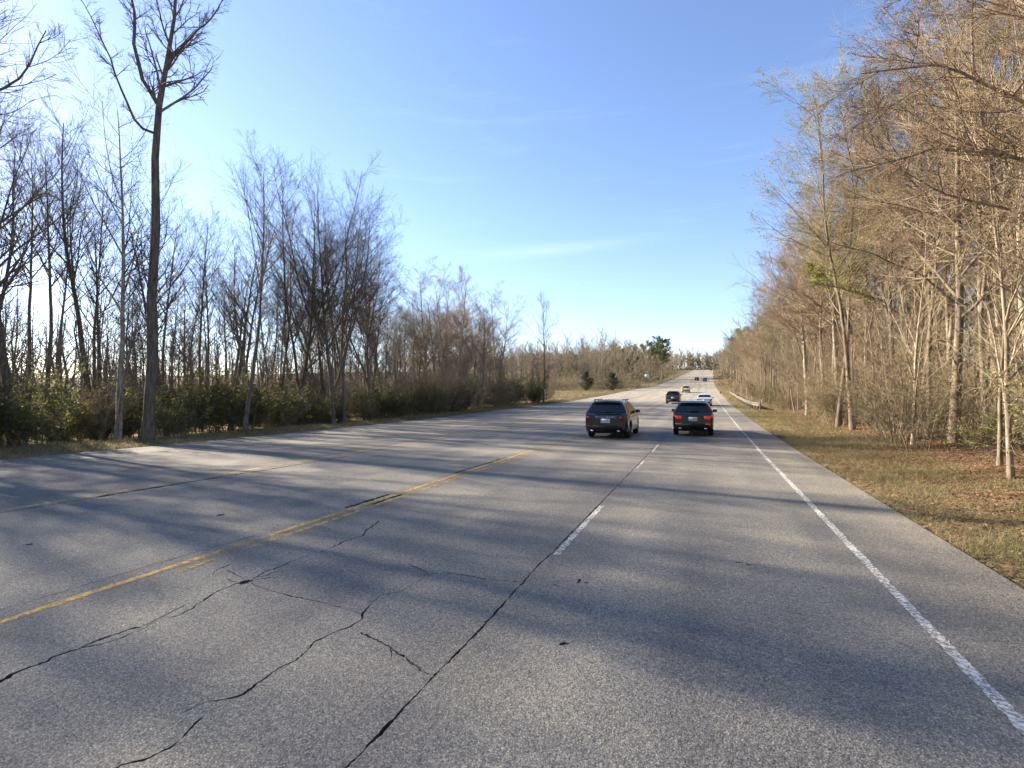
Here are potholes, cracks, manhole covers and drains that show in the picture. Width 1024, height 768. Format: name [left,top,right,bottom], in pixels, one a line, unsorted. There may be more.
crack [0,521,378,683]
crack [116,564,516,768]
